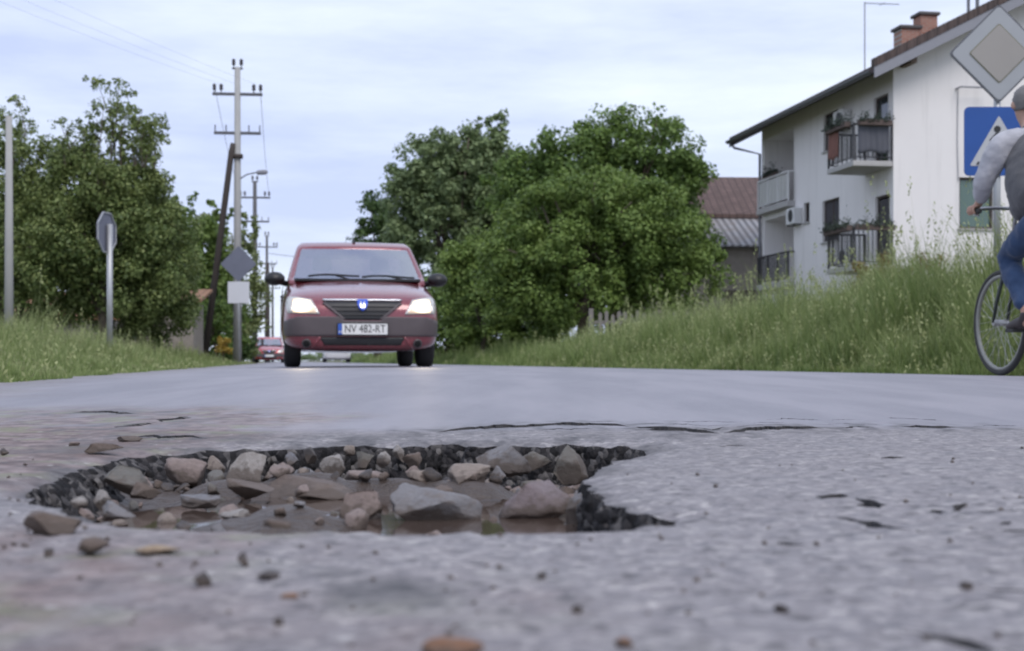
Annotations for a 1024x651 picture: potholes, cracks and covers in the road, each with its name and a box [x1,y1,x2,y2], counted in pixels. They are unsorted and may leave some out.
crack [82,411,201,439]
crack [440,418,879,447]
pothole [25,444,677,535]
crack [815,494,1024,533]
